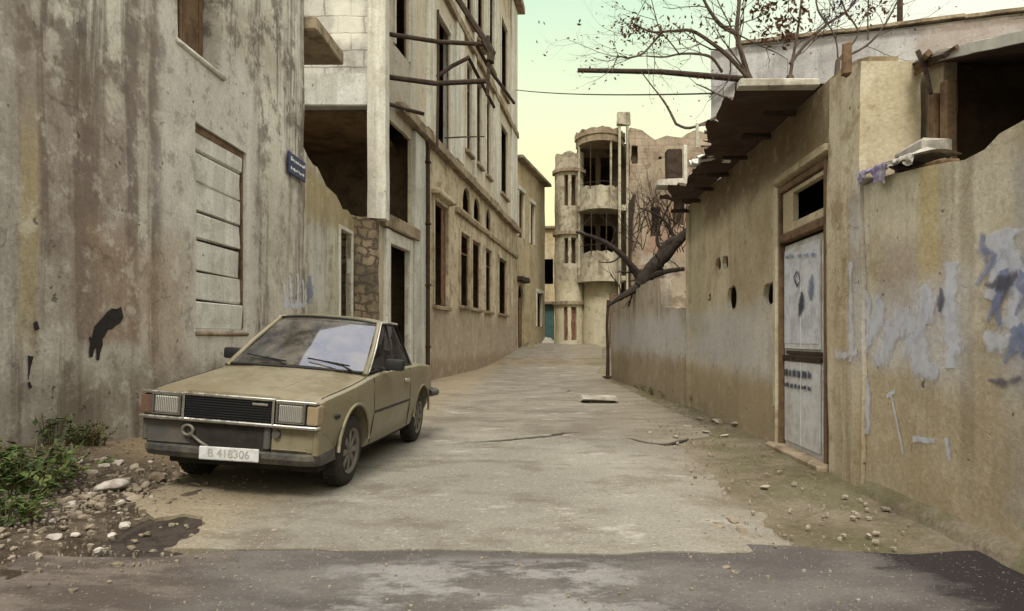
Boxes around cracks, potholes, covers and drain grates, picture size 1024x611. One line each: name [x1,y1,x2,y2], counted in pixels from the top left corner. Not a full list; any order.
pothole [88,517,202,557]
crack [489,433,569,442]
crack [631,438,692,446]
